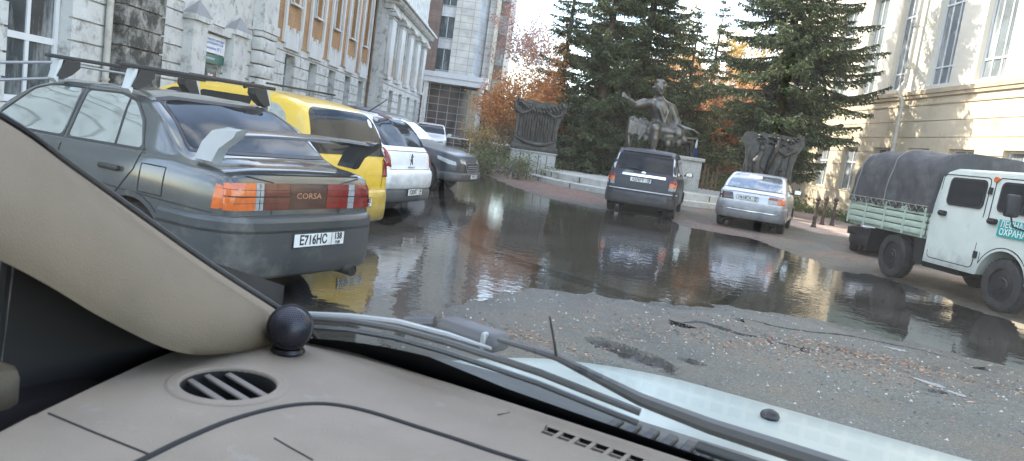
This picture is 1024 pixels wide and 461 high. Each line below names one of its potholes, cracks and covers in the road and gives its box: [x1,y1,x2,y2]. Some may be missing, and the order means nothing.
crack [669,317,984,368]
